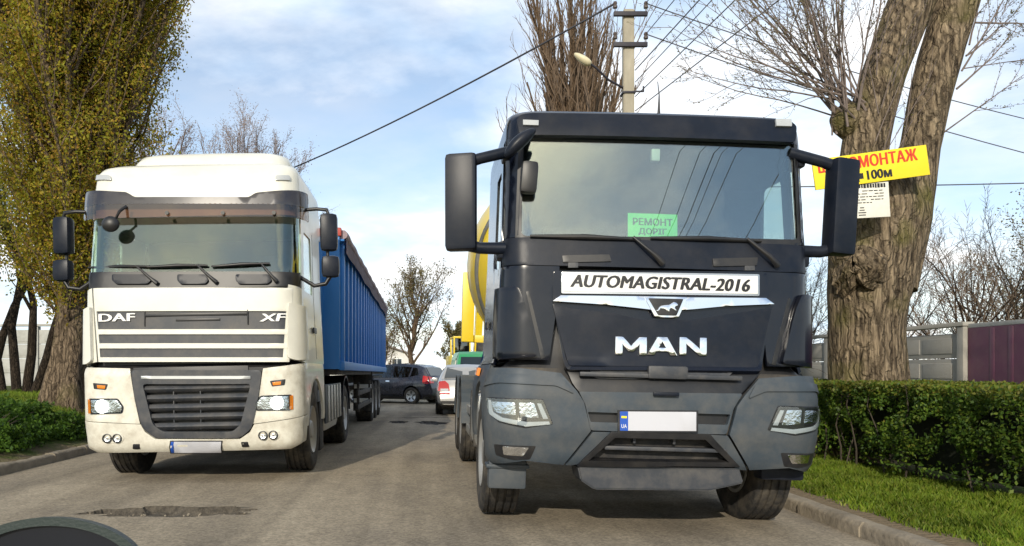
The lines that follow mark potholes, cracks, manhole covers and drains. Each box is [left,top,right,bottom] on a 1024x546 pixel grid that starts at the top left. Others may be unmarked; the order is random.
pothole [78,506,257,517]
